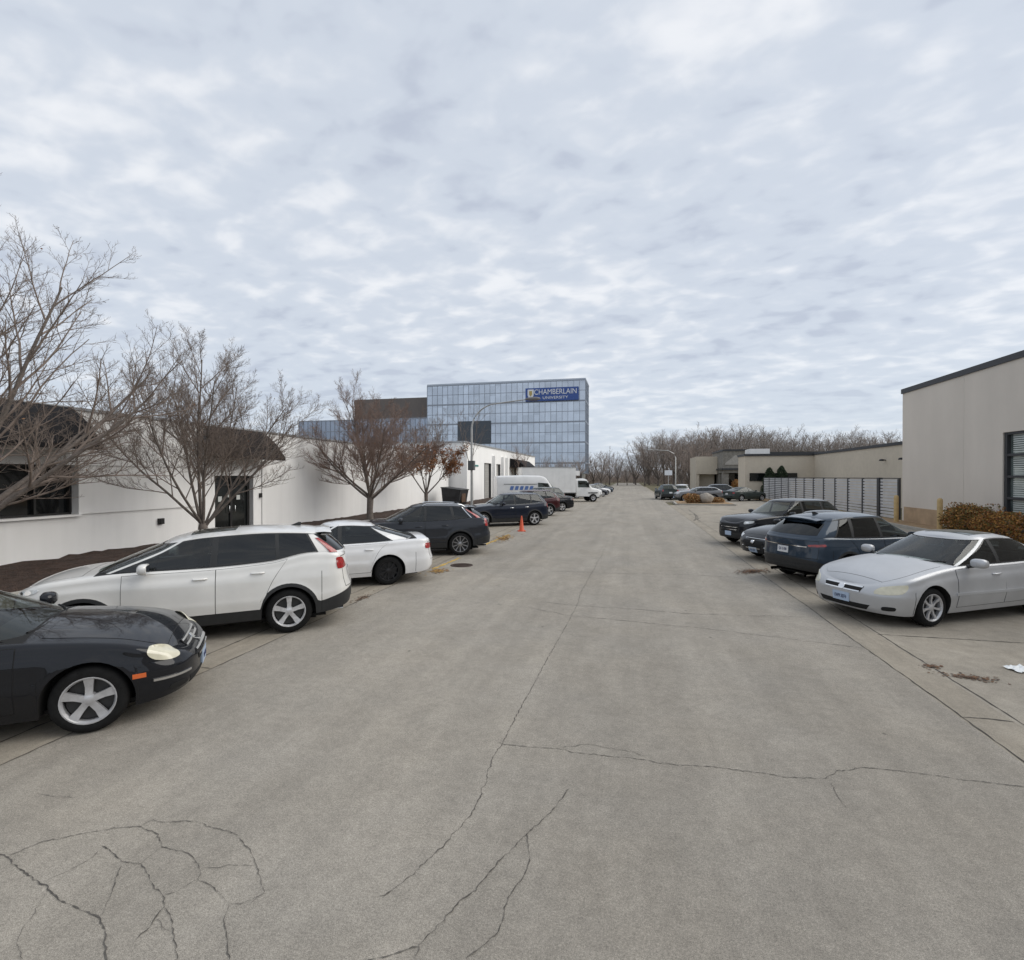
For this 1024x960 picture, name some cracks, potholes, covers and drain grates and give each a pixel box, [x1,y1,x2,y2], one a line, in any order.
crack [381,538,860,896]
crack [0,819,265,960]
crack [502,743,1018,807]
crack [368,789,568,960]
